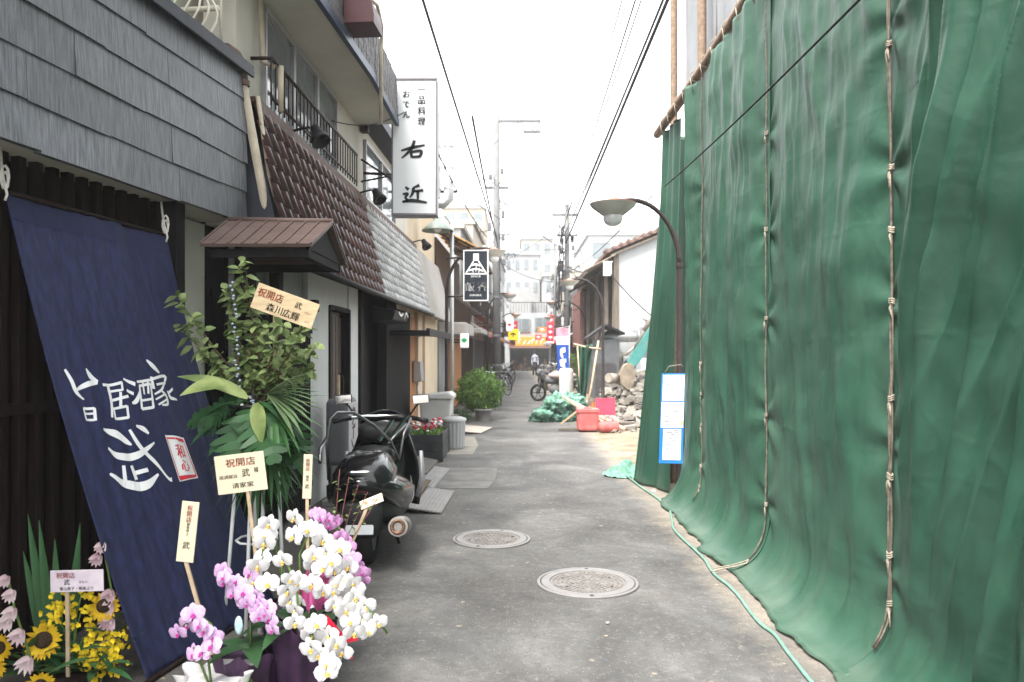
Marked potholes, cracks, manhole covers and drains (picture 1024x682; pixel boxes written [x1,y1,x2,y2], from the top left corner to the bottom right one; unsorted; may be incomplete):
manhole cover [537,567,639,600]
manhole cover [453,529,530,549]
